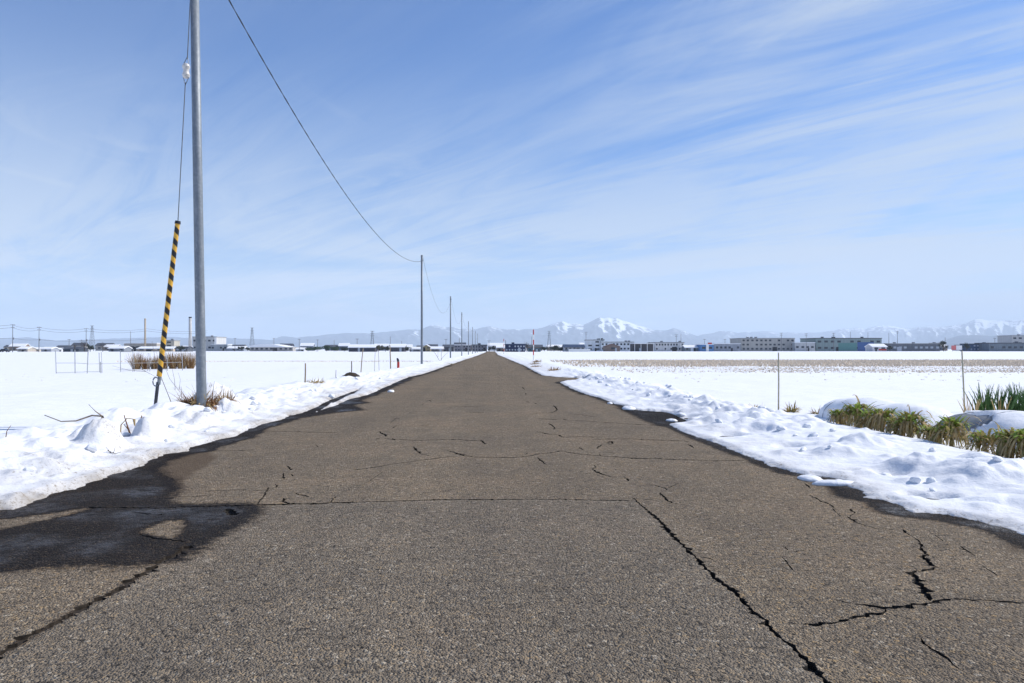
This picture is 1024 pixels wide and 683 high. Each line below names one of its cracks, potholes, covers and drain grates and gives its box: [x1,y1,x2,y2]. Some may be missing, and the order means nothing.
crack [89,387,748,515]
crack [782,484,1020,671]
